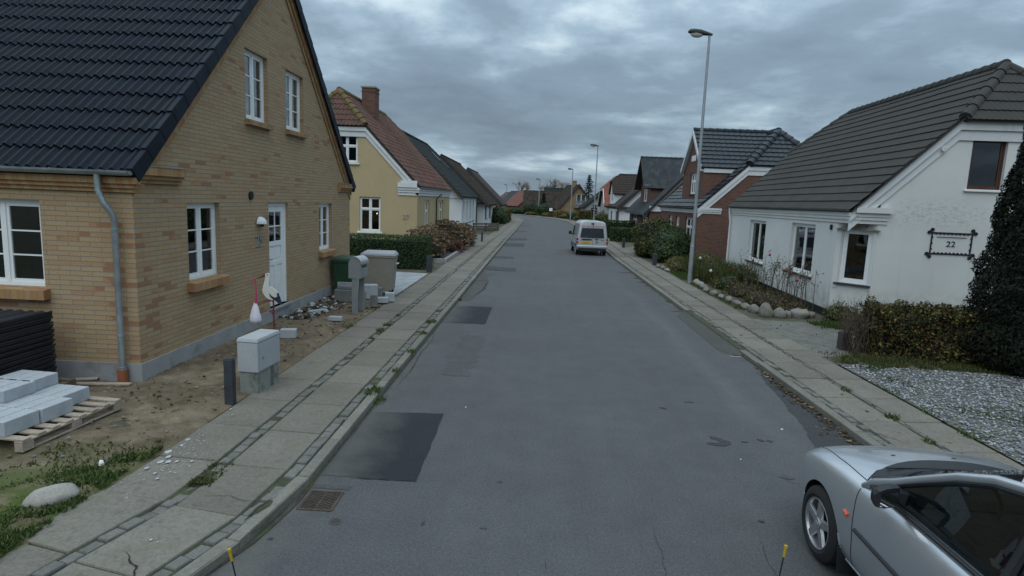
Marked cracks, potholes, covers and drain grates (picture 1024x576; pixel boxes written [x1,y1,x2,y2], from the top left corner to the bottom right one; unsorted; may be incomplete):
drain grate [296,490,344,512]
